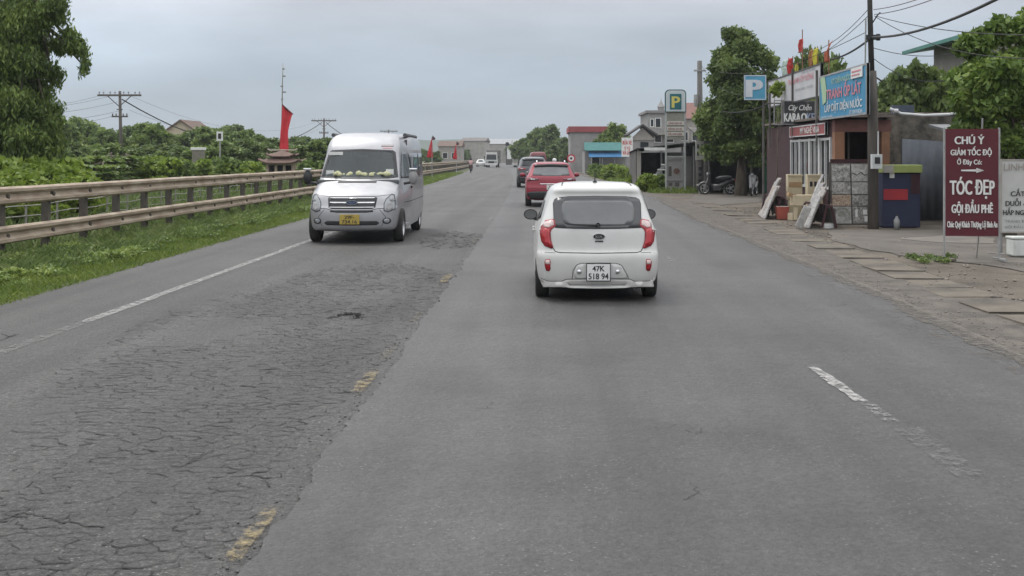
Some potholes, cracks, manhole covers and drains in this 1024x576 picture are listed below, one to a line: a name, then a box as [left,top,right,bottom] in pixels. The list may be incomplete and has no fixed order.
crack [420,231,481,248]
crack [0,261,451,576]
